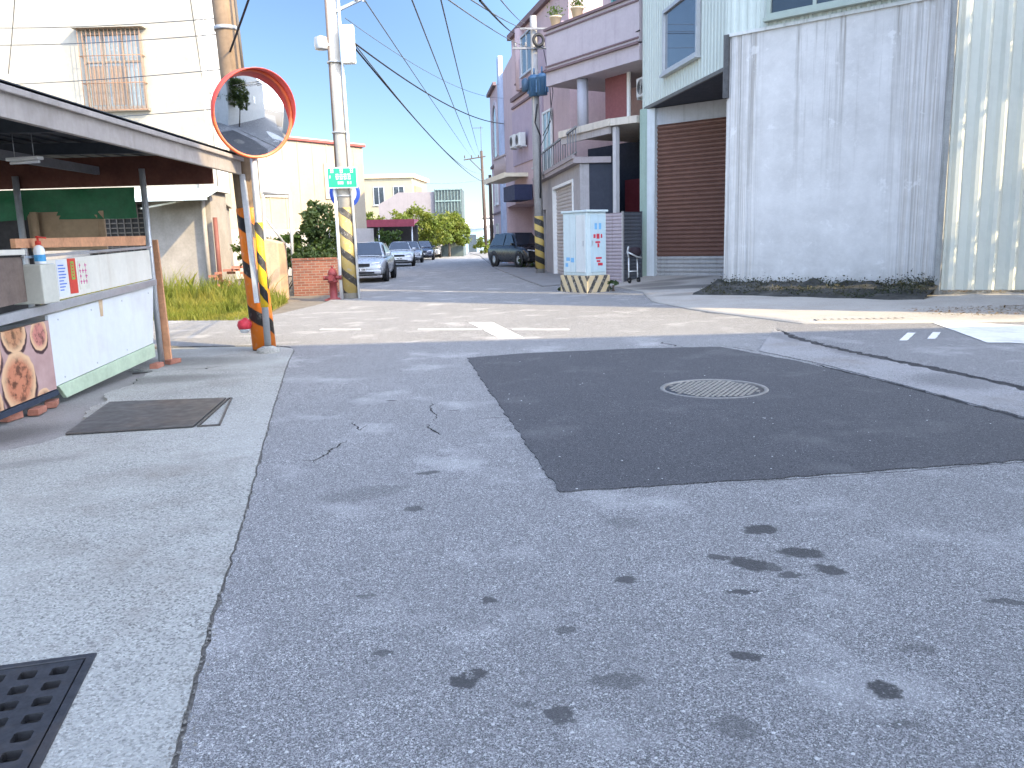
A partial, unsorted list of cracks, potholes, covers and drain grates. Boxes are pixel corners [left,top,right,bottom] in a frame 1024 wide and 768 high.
drain grate [0,652,97,768]
manhole cover [660,379,769,399]
crack [304,423,365,462]
